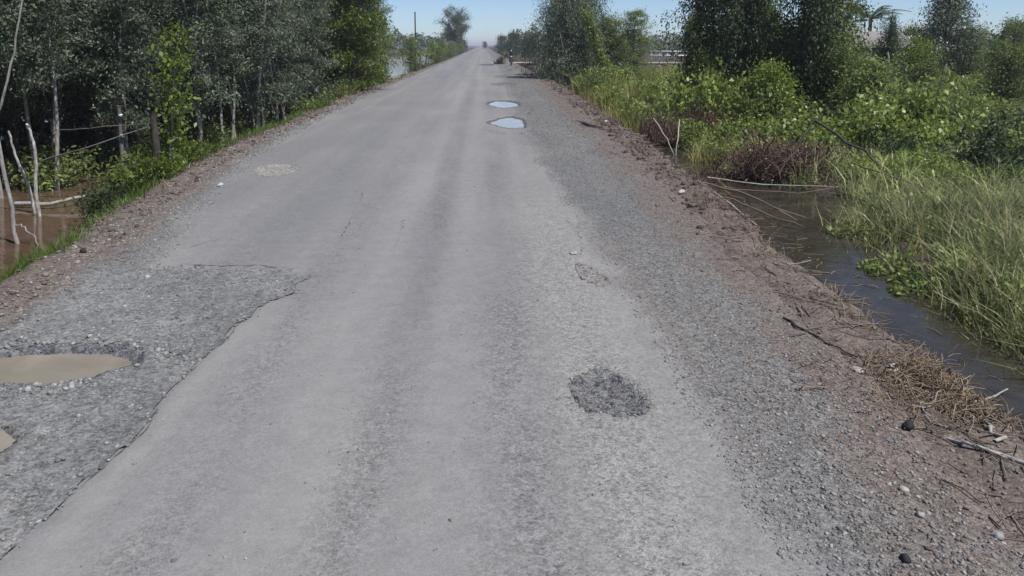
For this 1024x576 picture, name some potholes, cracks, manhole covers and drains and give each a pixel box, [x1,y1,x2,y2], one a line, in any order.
pothole [486,116,527,129]
pothole [0,260,311,560]
pothole [486,100,522,108]
